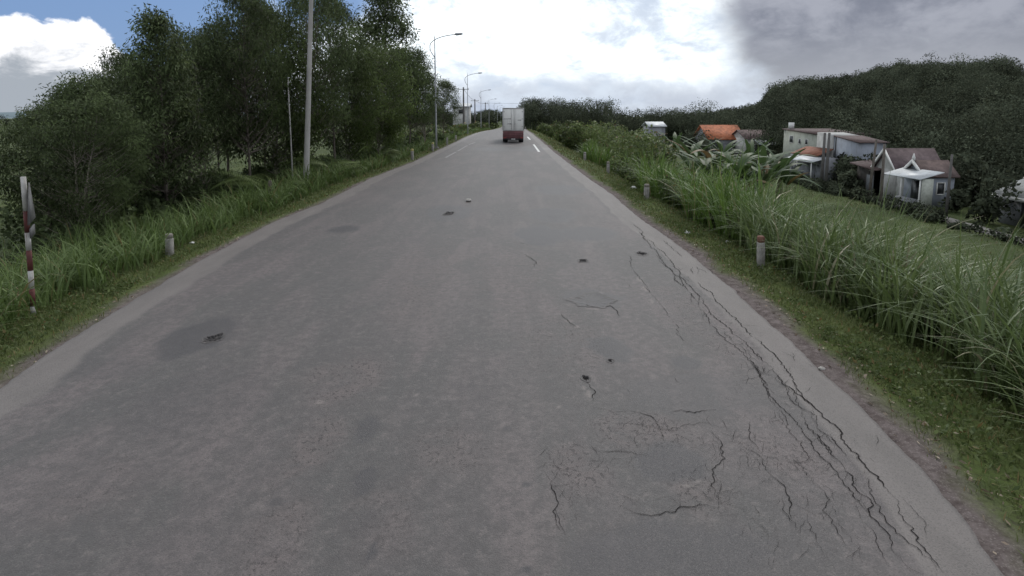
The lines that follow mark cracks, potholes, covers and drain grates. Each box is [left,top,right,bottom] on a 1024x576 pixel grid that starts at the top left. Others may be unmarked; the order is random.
pothole [202,332,225,343]
crack [636,226,941,571]
crack [585,380,739,515]
